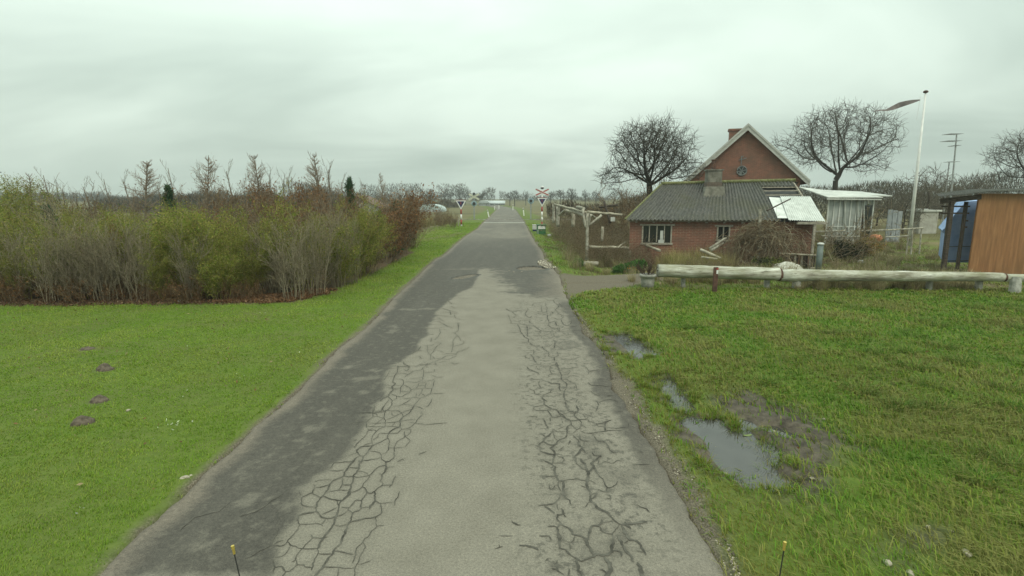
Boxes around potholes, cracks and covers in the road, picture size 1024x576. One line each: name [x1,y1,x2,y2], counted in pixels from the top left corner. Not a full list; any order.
crack [495,299,649,576]
crack [182,287,467,576]
